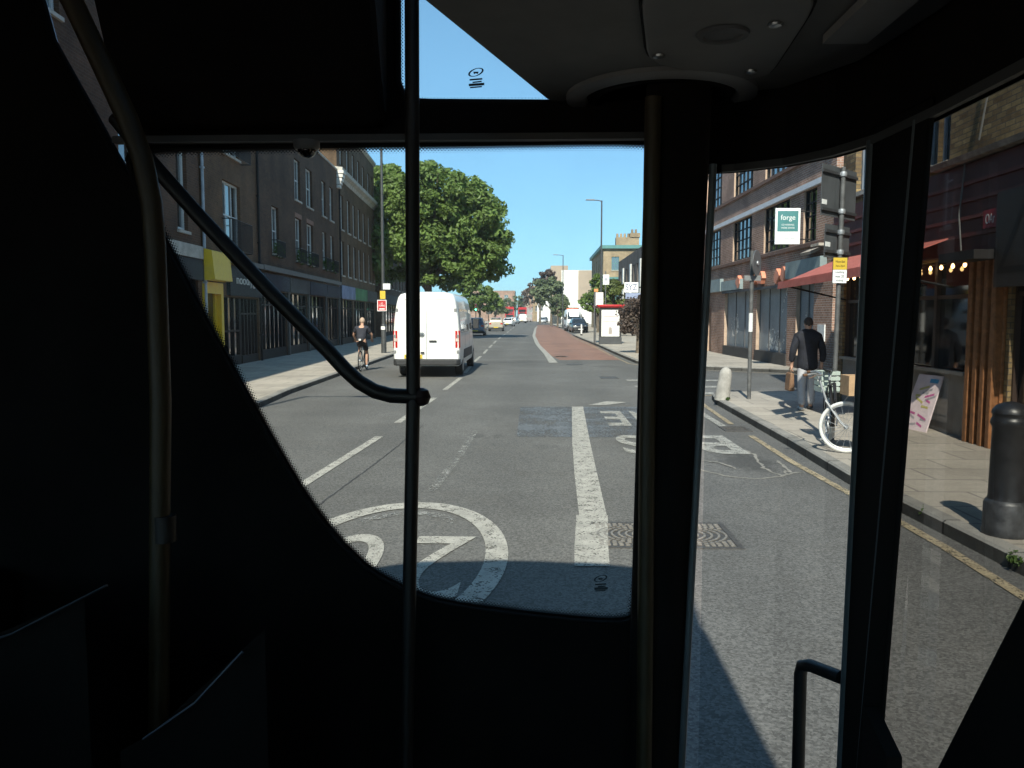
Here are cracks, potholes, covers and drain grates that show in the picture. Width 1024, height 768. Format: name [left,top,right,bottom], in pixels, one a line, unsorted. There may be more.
manhole cover [587,521,745,550]
crack [701,450,800,479]
